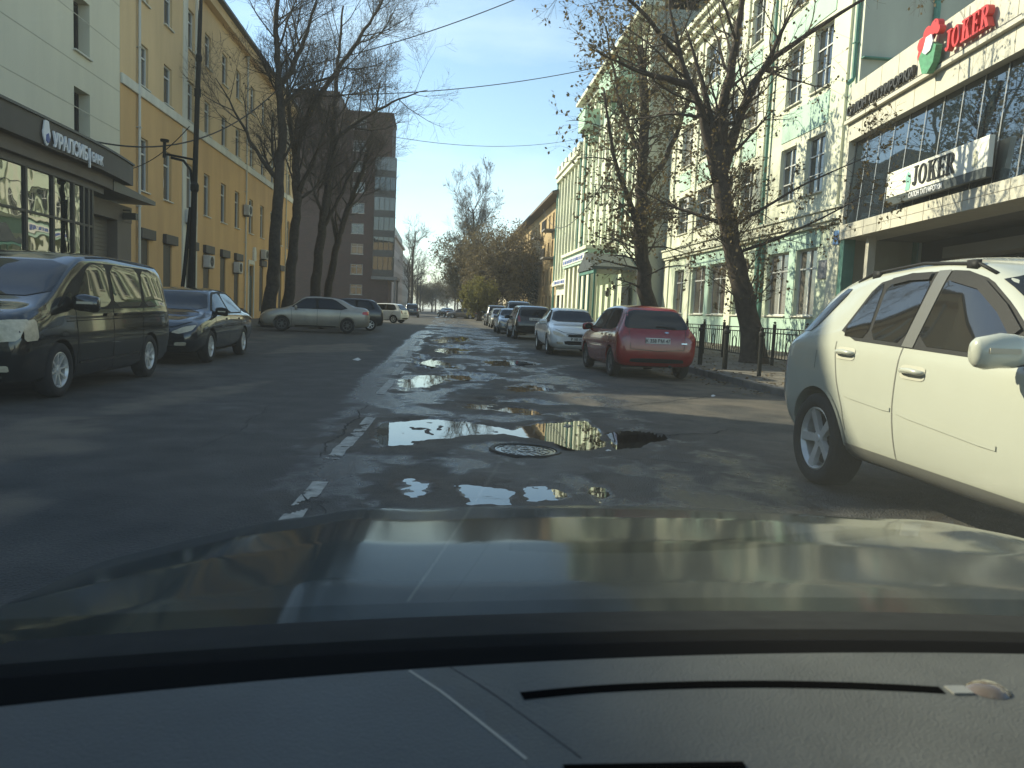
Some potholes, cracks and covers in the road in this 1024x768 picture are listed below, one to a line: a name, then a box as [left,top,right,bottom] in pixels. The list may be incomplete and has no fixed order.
pothole [367,416,610,451]
pothole [387,476,440,499]
pothole [606,431,668,449]
pothole [543,488,576,502]
pothole [583,481,620,503]
pothole [392,375,460,392]
pothole [407,352,440,372]
crack [320,404,368,456]
pothole [497,383,556,392]
pothole [454,485,524,502]
pothole [476,359,543,368]
